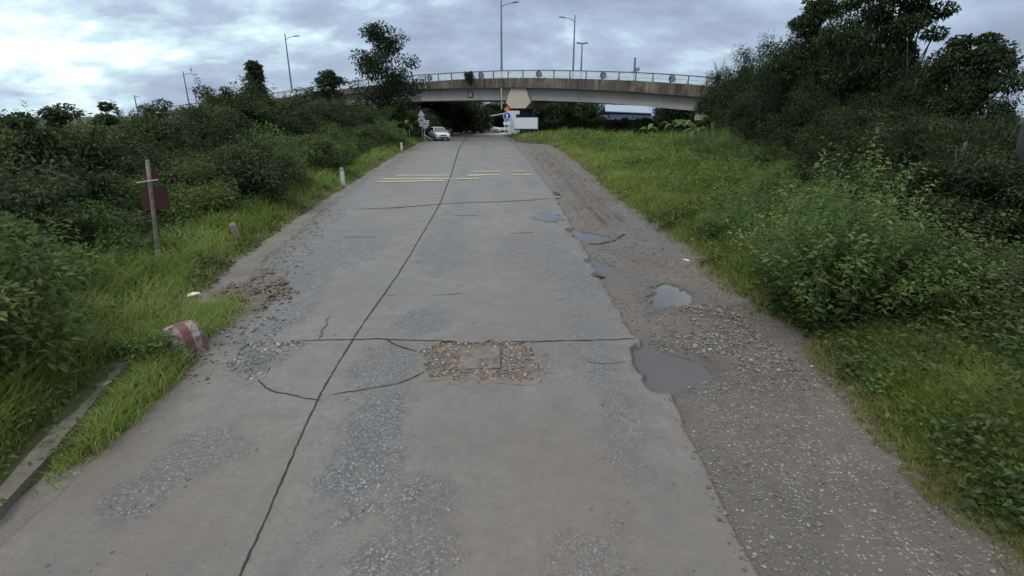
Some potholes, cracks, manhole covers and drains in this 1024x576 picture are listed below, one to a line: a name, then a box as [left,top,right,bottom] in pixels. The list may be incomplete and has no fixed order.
pothole [567,229,616,243]
pothole [411,336,555,386]
crack [292,316,634,352]
pothole [631,346,724,399]
crack [258,370,427,400]
pothole [639,281,704,311]
pothole [587,257,622,275]
